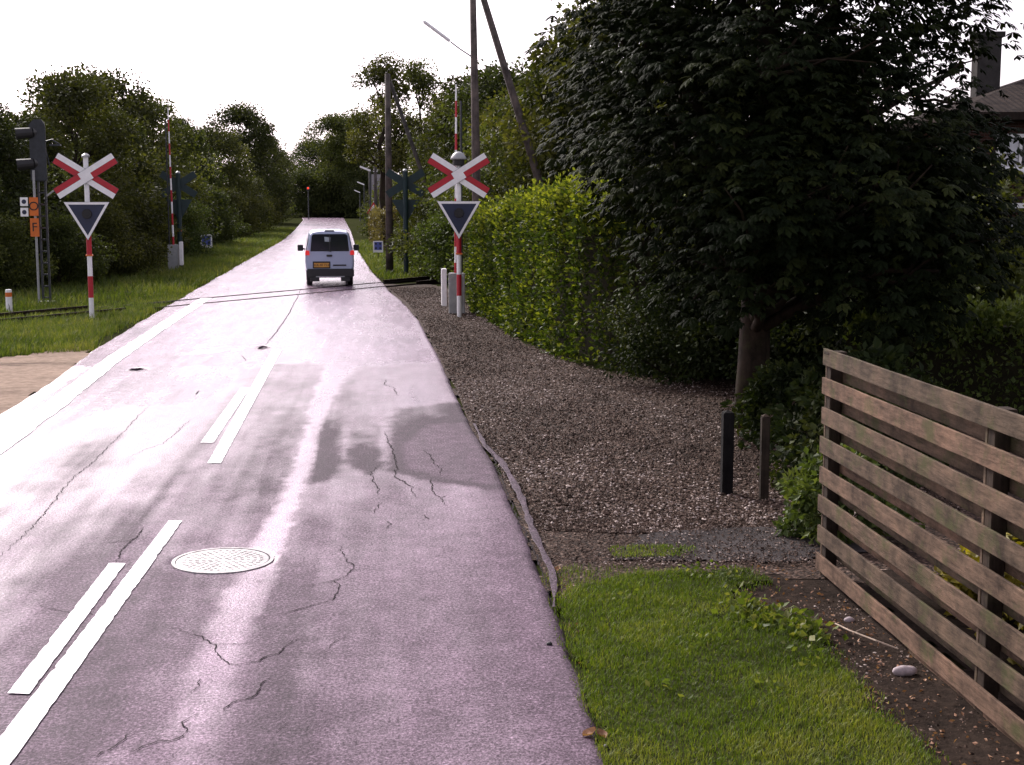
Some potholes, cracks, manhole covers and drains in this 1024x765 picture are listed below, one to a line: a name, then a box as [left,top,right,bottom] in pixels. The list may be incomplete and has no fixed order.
manhole cover [171,547,274,574]
crack [172,627,307,710]
crack [82,713,197,758]
crack [2,416,189,555]
crack [370,433,446,528]
crack [263,545,354,617]
